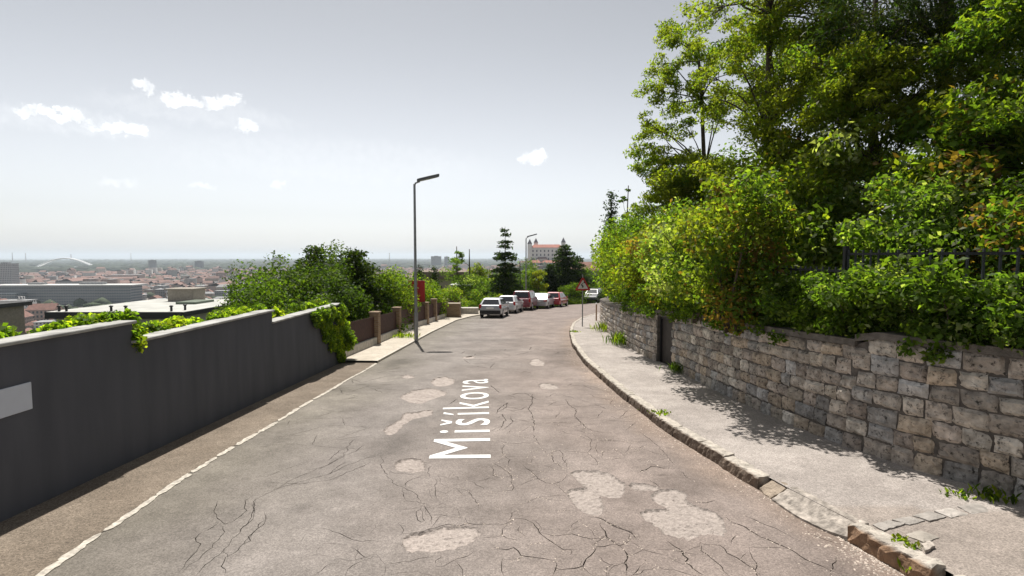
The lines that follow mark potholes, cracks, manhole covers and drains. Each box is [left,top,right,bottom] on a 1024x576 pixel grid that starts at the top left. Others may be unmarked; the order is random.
crack [181,371,841,576]
